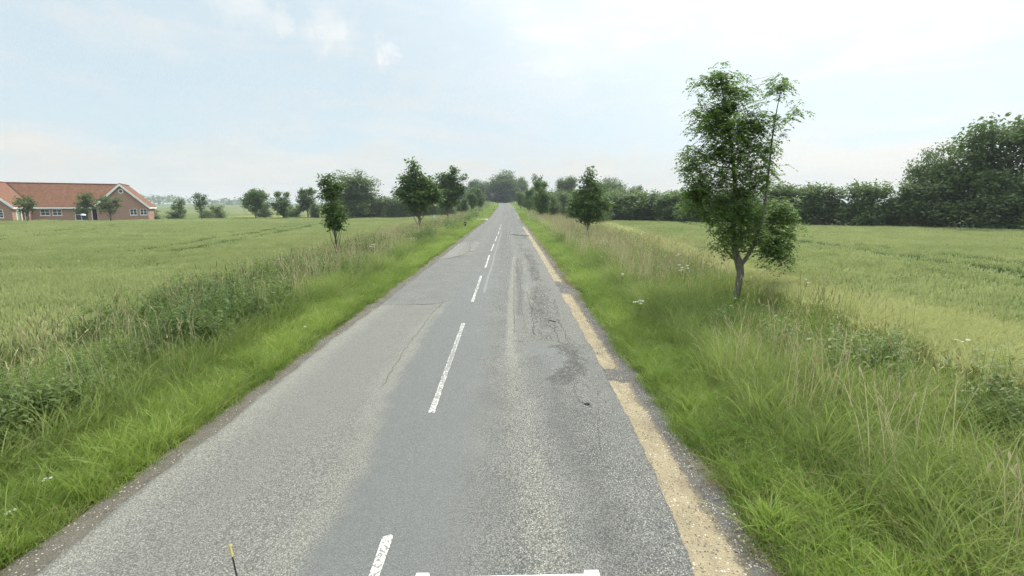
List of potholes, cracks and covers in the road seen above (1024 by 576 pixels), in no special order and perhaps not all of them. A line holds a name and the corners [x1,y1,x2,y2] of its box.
crack [381,301,447,387]
crack [516,238,606,450]
